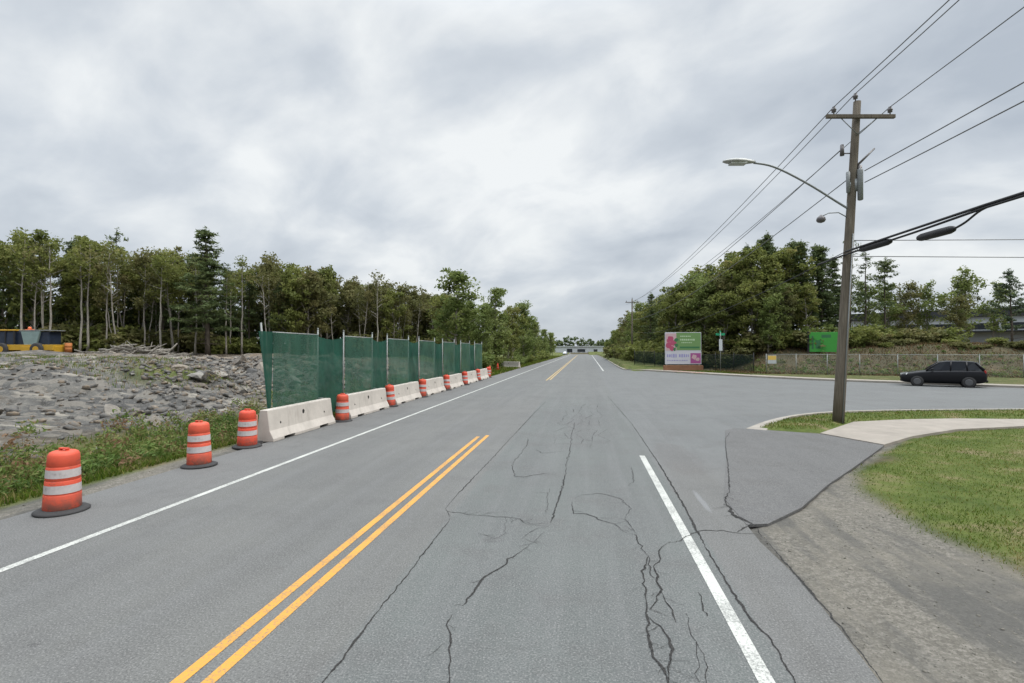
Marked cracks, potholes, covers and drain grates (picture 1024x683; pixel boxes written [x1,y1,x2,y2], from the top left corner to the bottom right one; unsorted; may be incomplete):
crack [322,401,883,683]
